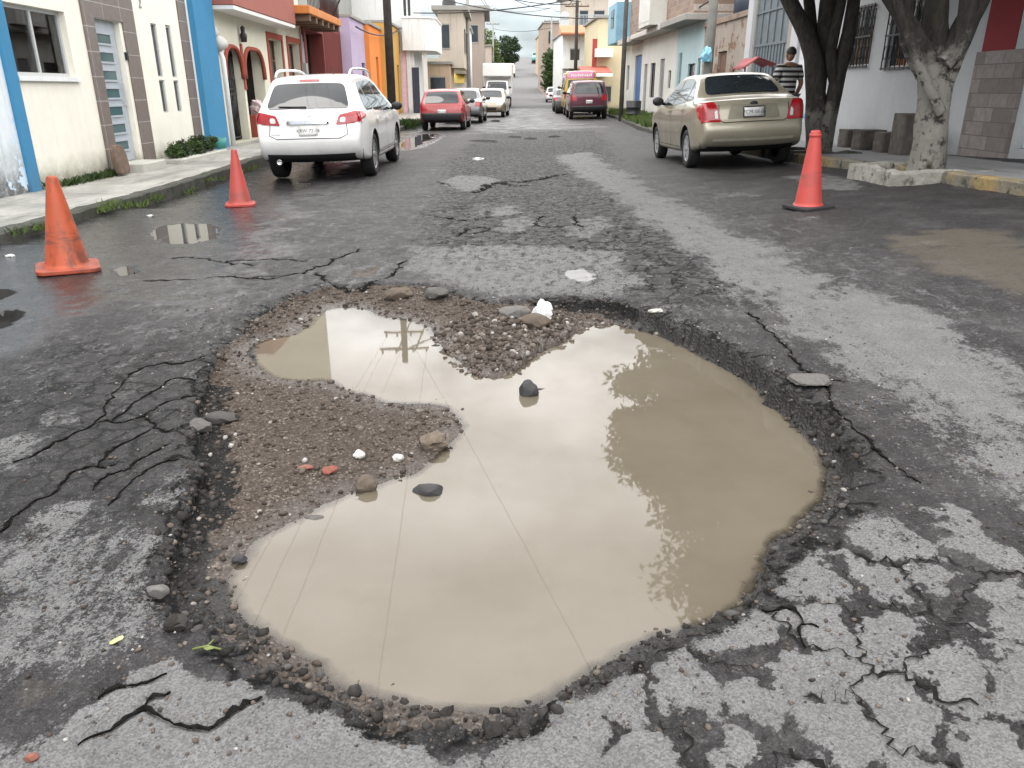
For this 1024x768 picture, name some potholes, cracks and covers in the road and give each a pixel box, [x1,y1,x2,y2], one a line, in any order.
crack [532,216,583,228]
crack [473,176,552,193]
crack [747,312,921,484]
pothole [162,285,861,735]
crack [659,545,1024,768]
crack [440,217,491,237]
crack [0,356,204,533]
crack [143,249,359,281]
